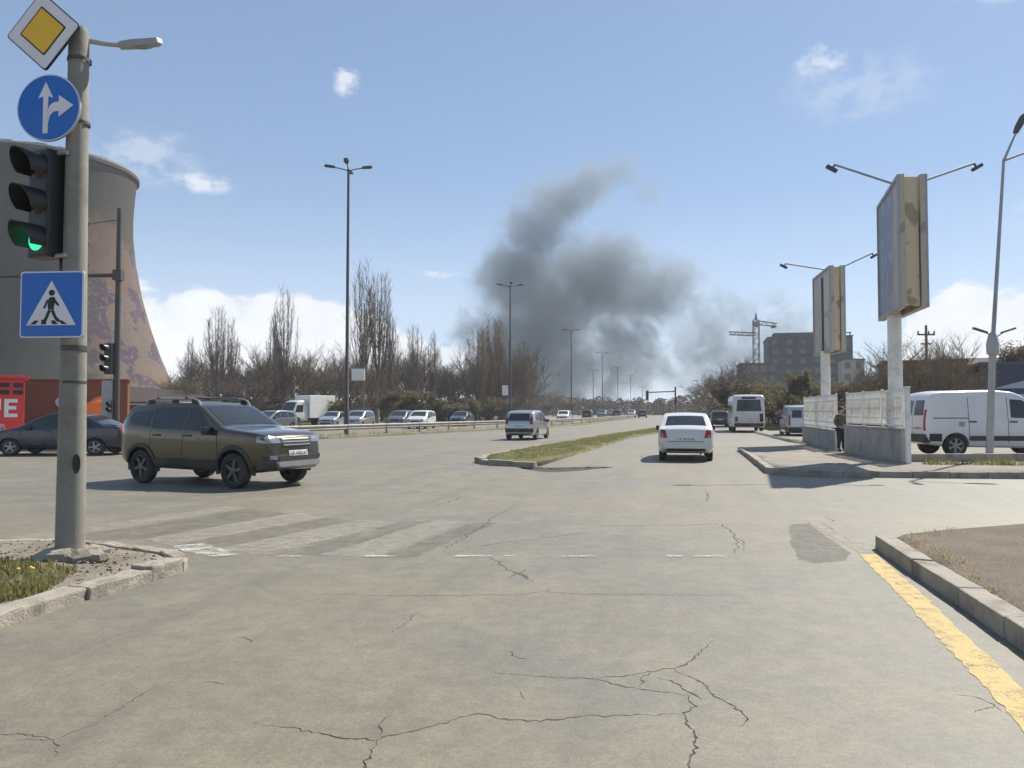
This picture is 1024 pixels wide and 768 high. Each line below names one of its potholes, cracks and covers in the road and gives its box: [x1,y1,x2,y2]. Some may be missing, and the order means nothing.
crack [0,678,161,757]
crack [263,642,749,768]
crack [312,504,746,632]
